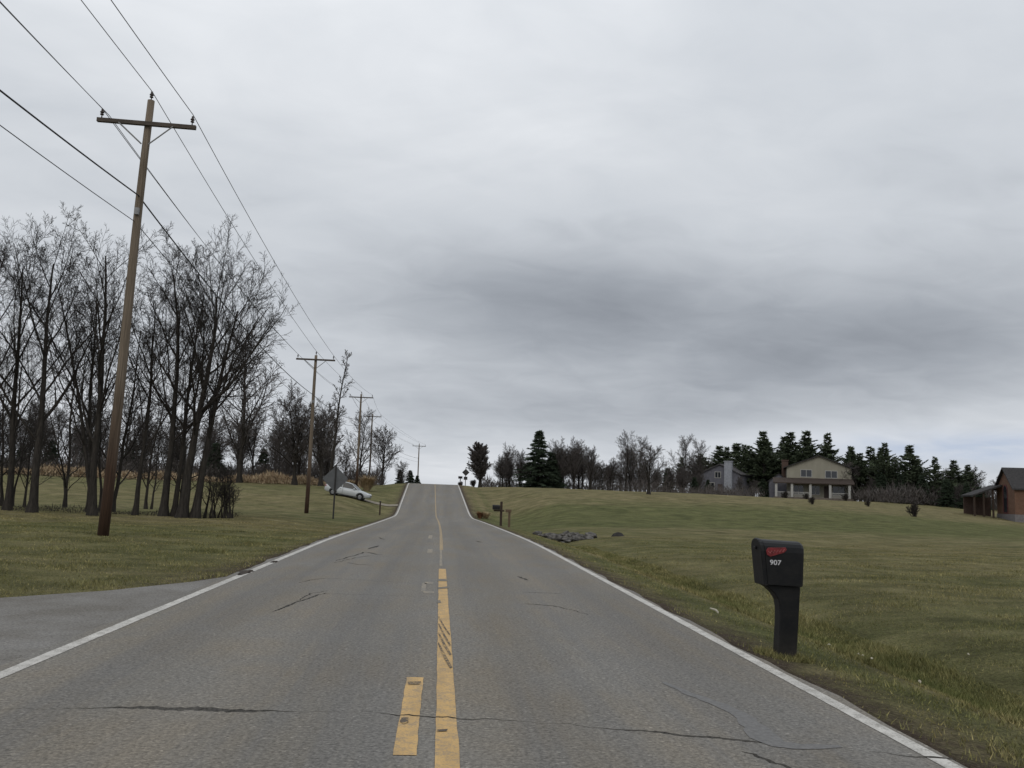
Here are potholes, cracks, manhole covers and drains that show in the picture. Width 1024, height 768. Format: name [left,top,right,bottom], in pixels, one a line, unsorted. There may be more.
crack [0,706,792,768]
crack [273,537,421,612]
